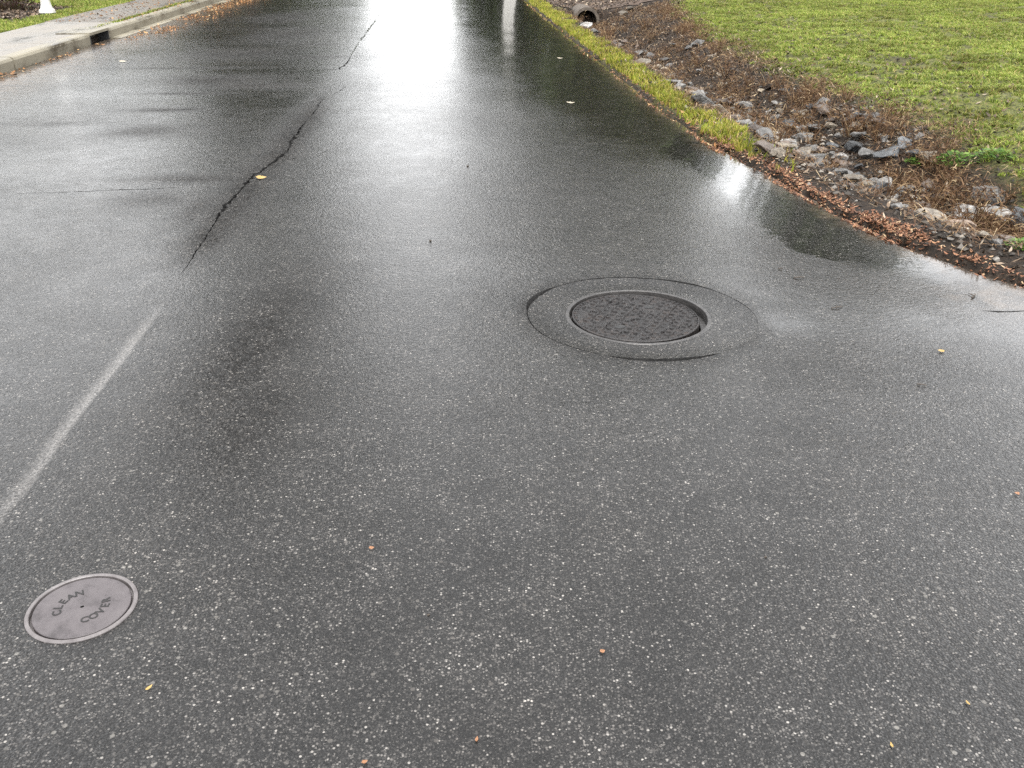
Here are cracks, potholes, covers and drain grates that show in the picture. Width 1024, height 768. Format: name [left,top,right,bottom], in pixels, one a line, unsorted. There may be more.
manhole cover [527,278,758,359]
crack [182,6,384,272]
manhole cover [24,573,139,644]
drain grate [55,27,110,45]
